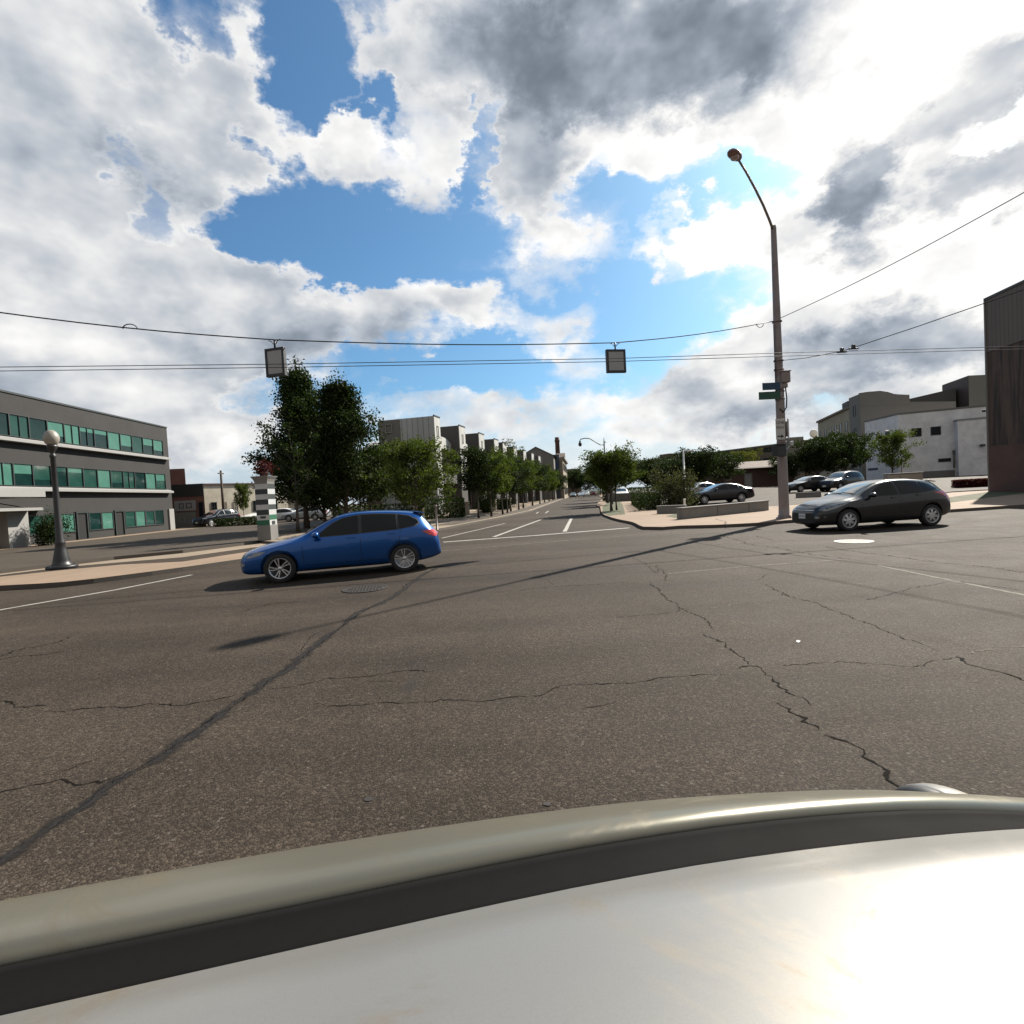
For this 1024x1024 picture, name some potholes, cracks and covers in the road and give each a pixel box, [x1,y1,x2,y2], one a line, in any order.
crack [628,519,1024,787]
crack [315,657,952,709]
manhole cover [342,584,388,593]
crack [1,751,114,792]
